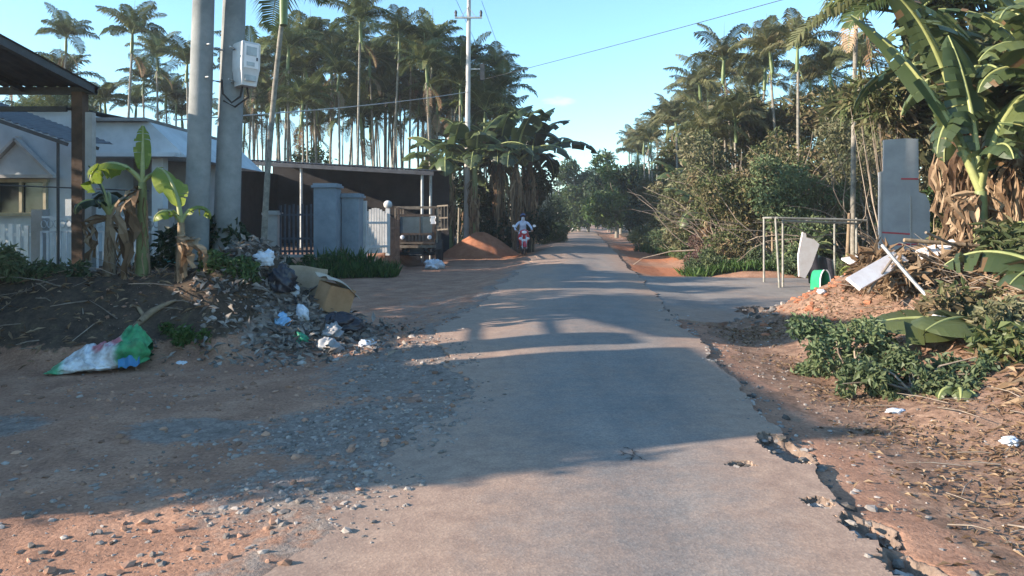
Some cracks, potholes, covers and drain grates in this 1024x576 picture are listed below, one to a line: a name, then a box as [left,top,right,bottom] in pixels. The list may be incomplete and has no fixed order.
pothole [801,496,834,508]
